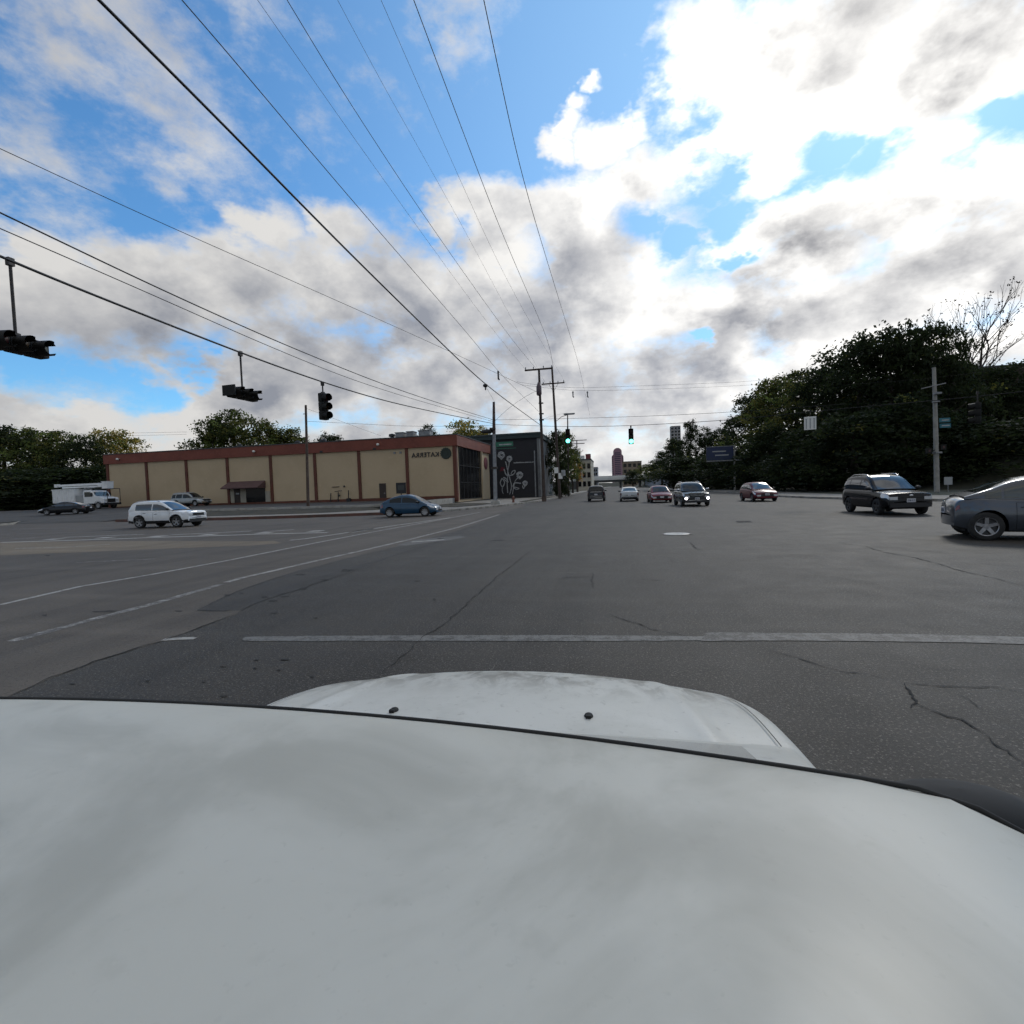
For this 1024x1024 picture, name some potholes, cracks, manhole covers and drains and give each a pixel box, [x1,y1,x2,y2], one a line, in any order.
crack [904,664,1022,762]
crack [378,553,527,675]
